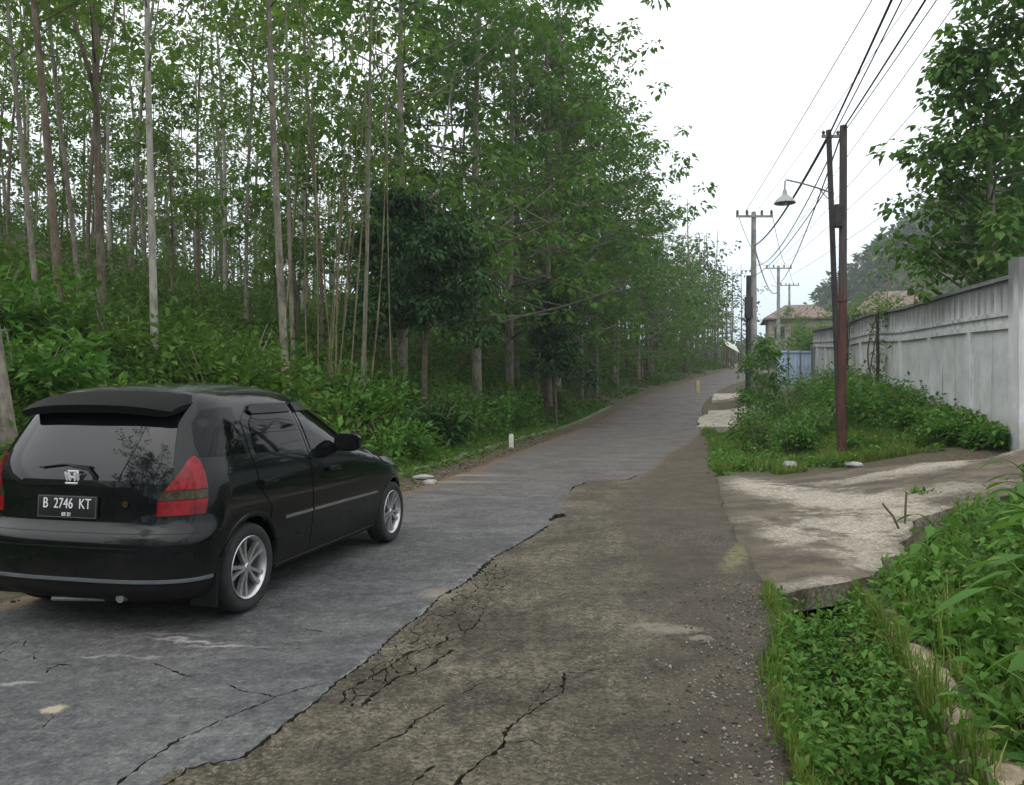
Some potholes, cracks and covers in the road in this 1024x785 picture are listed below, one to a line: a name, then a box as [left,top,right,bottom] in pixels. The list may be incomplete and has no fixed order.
crack [454,669,599,785]
crack [2,640,68,673]
crack [117,525,549,785]
